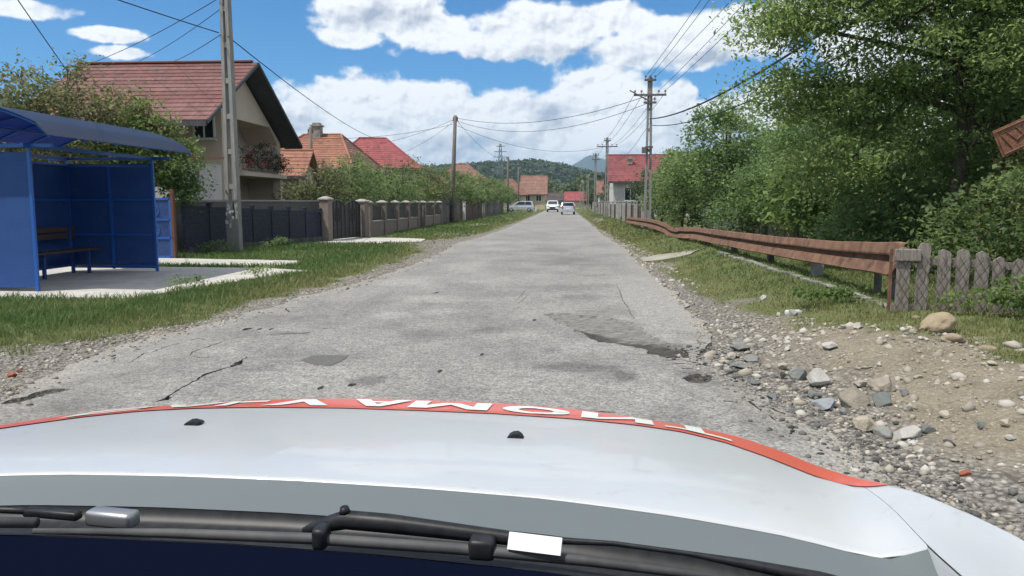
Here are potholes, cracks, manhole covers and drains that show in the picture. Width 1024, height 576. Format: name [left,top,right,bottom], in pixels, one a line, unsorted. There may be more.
pothole [545,313,690,358]
pothole [682,374,712,383]
crack [129,338,247,402]
